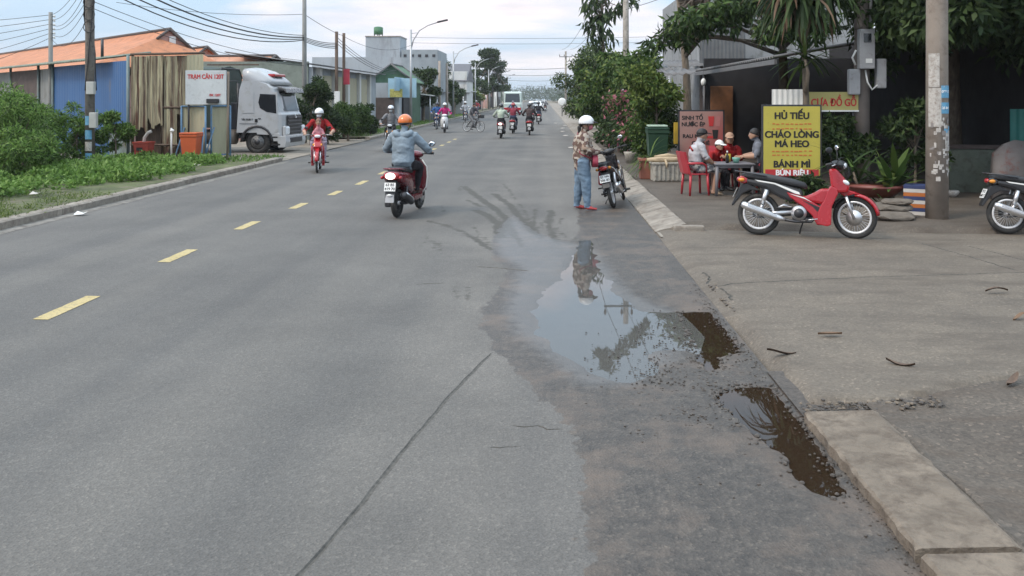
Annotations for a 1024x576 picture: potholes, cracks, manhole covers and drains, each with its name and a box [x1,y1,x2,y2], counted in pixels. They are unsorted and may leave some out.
pothole [676,310,747,375]
pothole [712,383,856,500]
crack [295,353,518,576]
